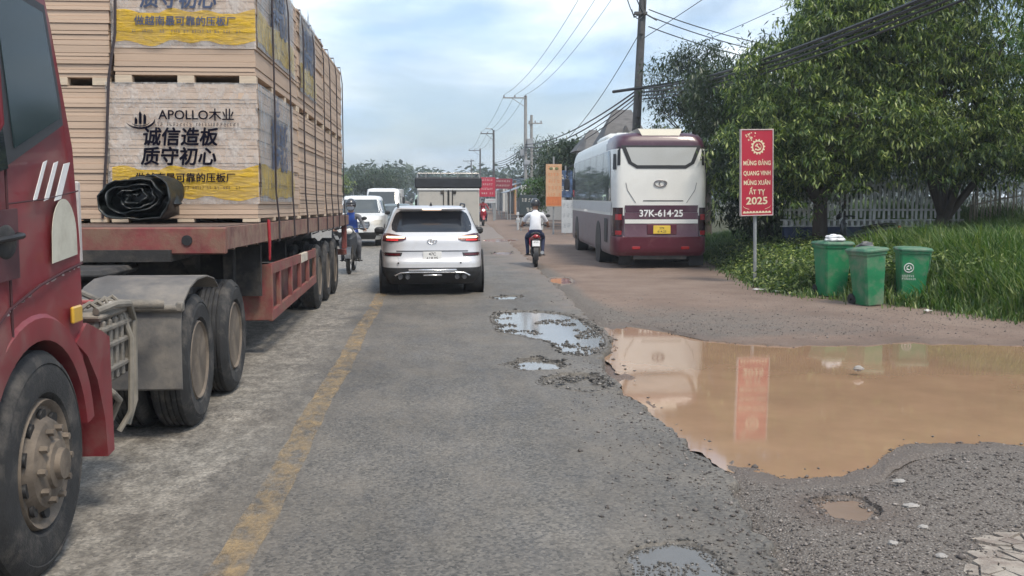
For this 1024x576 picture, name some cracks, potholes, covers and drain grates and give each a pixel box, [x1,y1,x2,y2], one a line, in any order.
pothole [546,277,573,286]
pothole [799,491,896,526]
pothole [612,536,745,576]
pothole [601,322,1024,490]
pothole [489,308,611,357]
pothole [498,355,573,371]
pothole [535,371,623,393]
